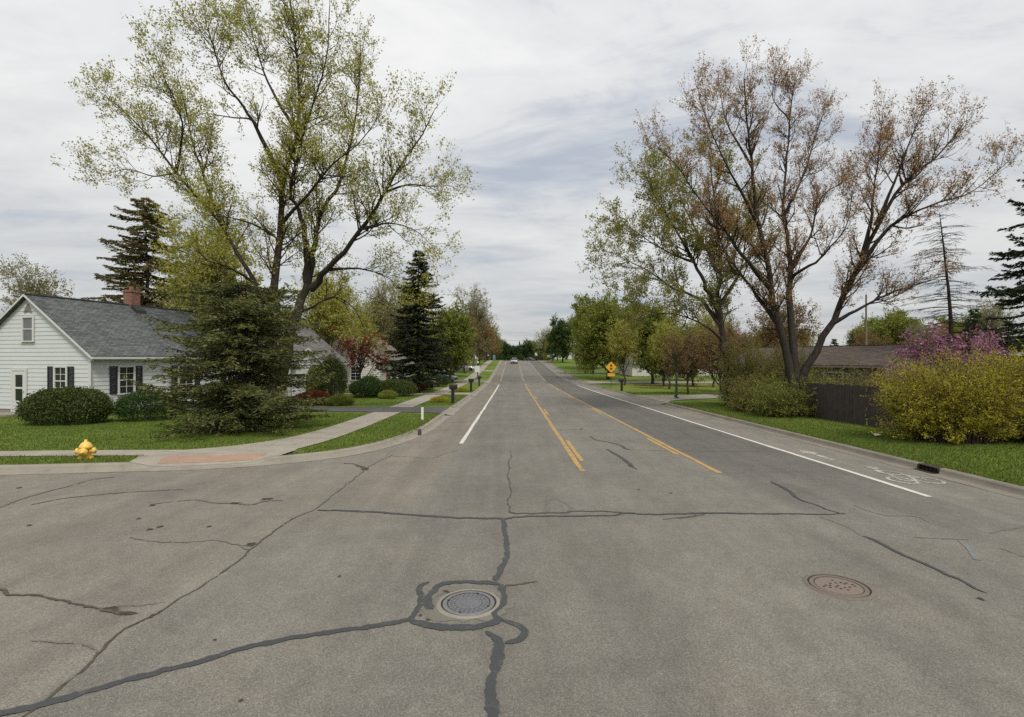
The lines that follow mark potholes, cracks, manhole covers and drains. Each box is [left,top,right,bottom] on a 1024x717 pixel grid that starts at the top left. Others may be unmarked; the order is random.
crack [31,640,99,652]
crack [507,452,614,514]
crack [0,588,159,614]
manhole cover [436,589,500,619]
crack [0,477,278,507]
manhole cover [802,573,877,601]
drain grate [914,463,943,474]
crack [821,505,929,536]
